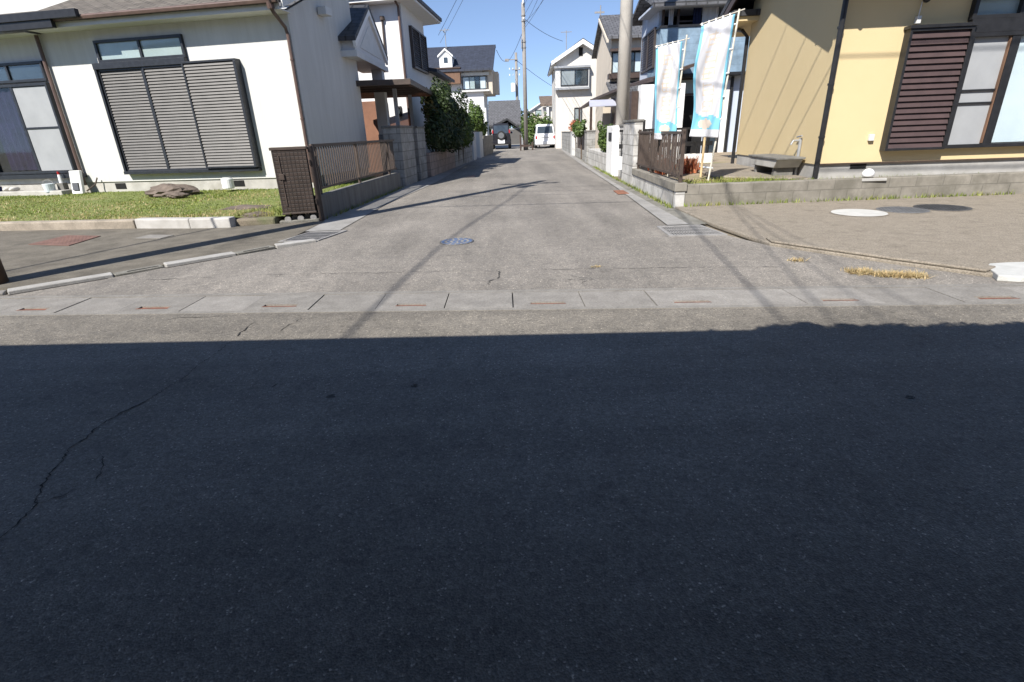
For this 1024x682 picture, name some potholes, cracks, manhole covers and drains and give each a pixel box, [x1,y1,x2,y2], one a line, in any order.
manhole cover [829,209,890,217]
drain grate [657,224,728,237]
crack [0,343,228,538]
drain grate [278,230,347,242]
